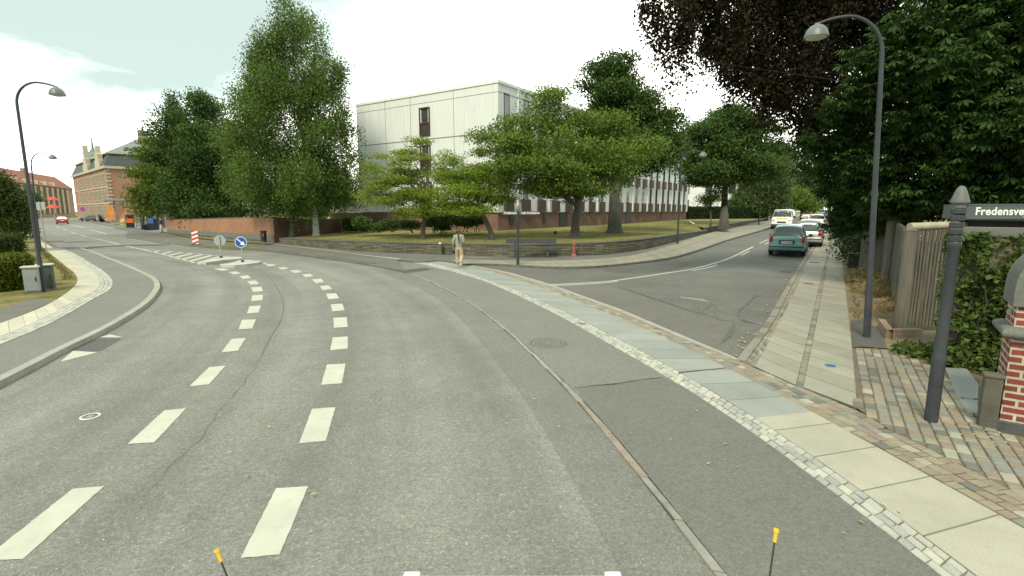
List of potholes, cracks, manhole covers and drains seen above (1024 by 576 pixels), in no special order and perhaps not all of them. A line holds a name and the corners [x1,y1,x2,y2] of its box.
manhole cover [528,338,569,348]
crack [144,271,284,497]
